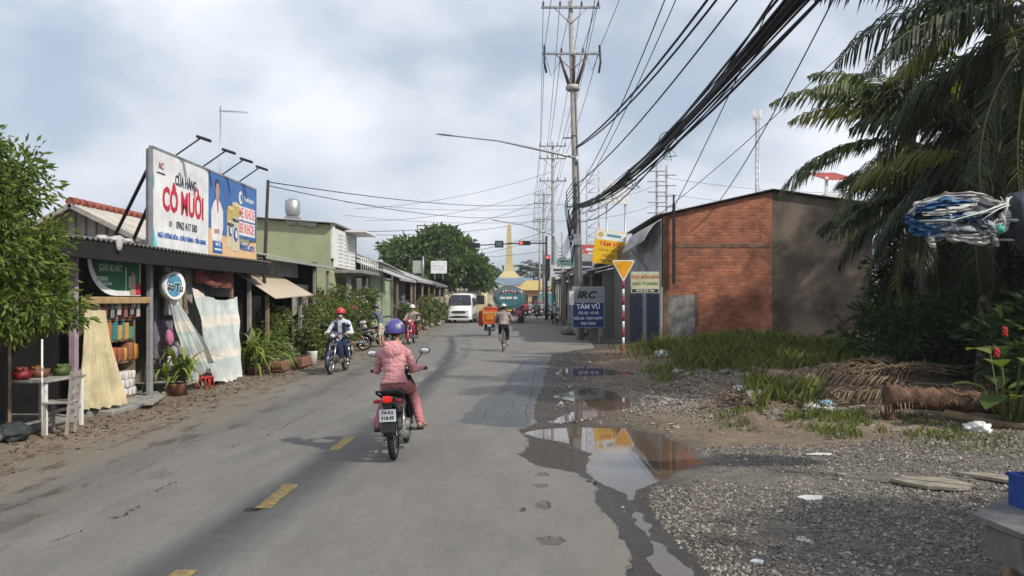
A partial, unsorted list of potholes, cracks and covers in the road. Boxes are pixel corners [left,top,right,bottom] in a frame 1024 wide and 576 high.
pothole [537,385,640,424]
crack [461,366,536,425]
crack [232,392,357,448]
pothole [520,423,723,576]
pothole [548,364,640,377]
crack [110,482,177,519]
